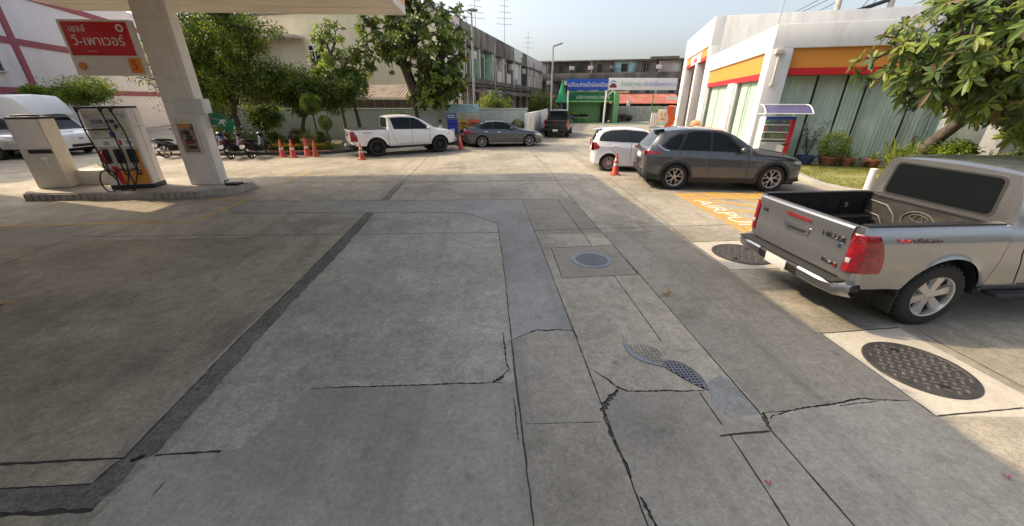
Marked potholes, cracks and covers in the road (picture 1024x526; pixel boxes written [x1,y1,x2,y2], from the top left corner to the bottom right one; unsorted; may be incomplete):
manhole cover [711,244,771,265]
manhole cover [861,342,985,400]
crack [588,367,704,526]
crack [311,329,578,442]
crack [762,398,910,431]
